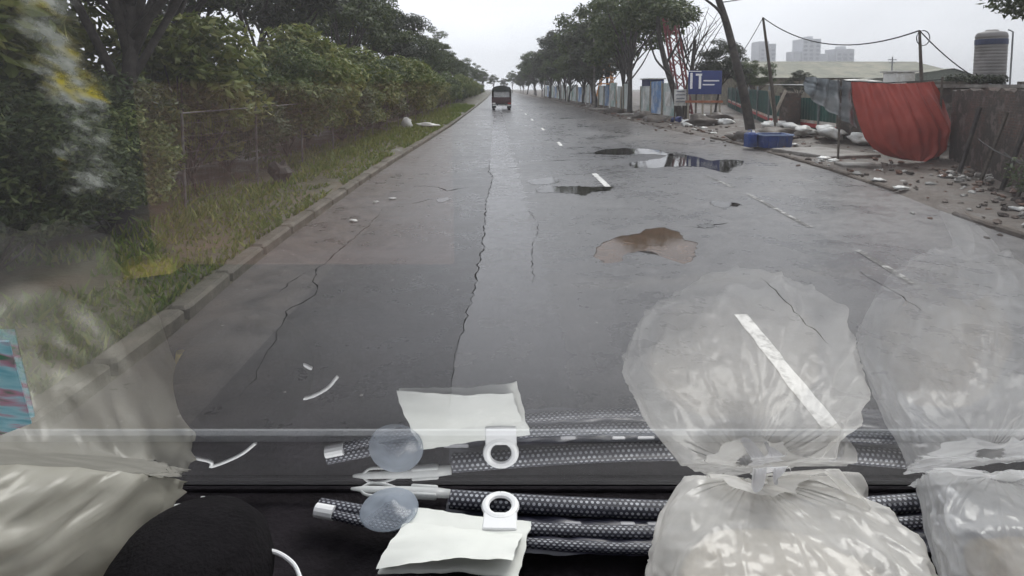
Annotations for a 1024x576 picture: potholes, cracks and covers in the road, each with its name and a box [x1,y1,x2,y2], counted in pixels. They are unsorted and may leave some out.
pothole [593,227,698,264]
crack [451,159,494,388]
crack [256,210,382,379]
crack [761,278,831,346]
